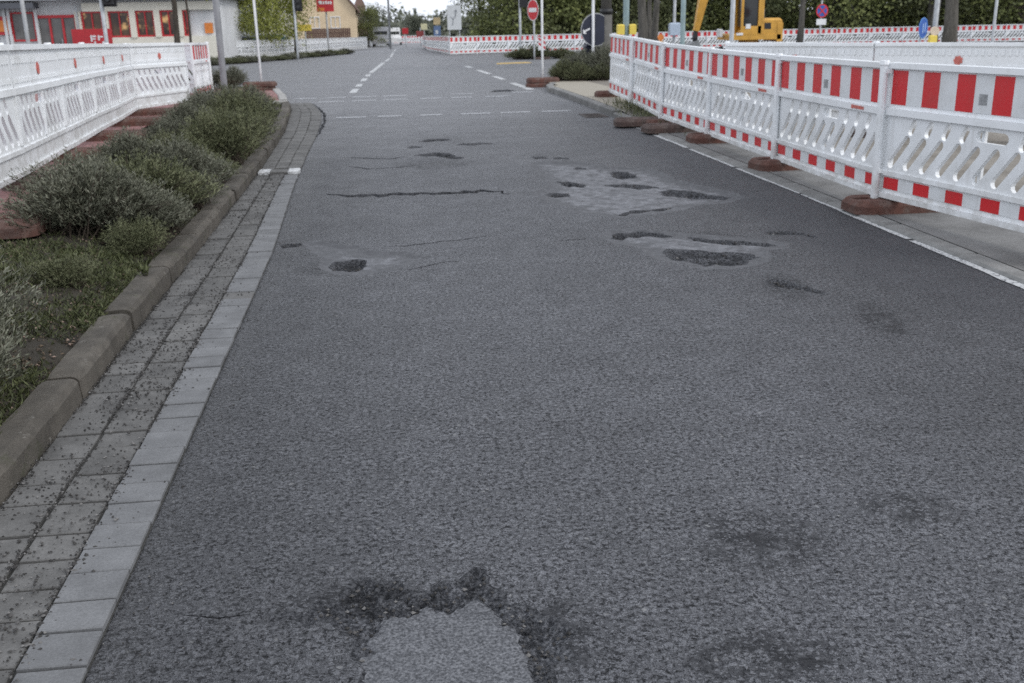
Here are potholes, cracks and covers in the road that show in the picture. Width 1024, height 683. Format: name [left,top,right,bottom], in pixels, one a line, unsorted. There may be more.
crack [389,236,484,247]
crack [327,189,506,198]
pothole [528,161,745,217]
pothole [766,279,831,295]
pothole [598,228,790,270]
